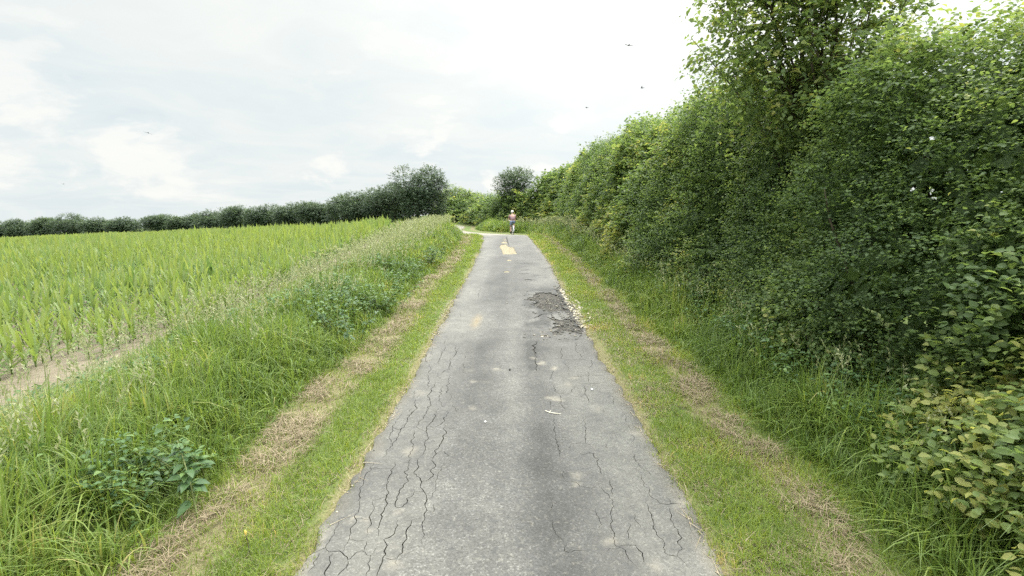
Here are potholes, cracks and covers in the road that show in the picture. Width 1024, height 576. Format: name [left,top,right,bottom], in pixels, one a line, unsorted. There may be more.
pothole [527,292,570,313]
pothole [549,317,584,335]
crack [549,335,614,407]
crack [551,415,687,567]
